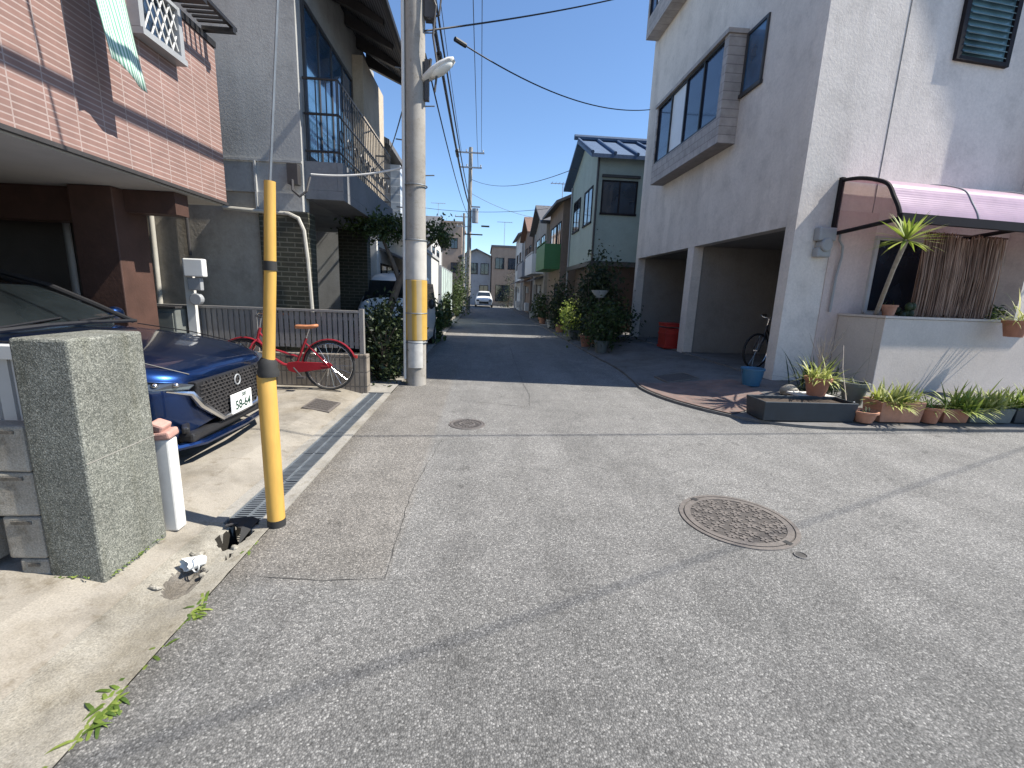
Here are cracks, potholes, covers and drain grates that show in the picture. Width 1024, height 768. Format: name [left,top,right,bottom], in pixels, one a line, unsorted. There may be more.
manhole cover [654,372,700,383]
drain grate [303,432,345,454]
pothole [215,528,254,573]
manhole cover [302,398,341,413]
drain grate [358,393,383,404]
drain grate [227,481,298,524]
manhole cover [679,495,801,551]
drain grate [327,416,361,433]
drain grate [344,404,373,417]
drain grate [282,453,325,482]
manhole cover [449,419,485,430]
